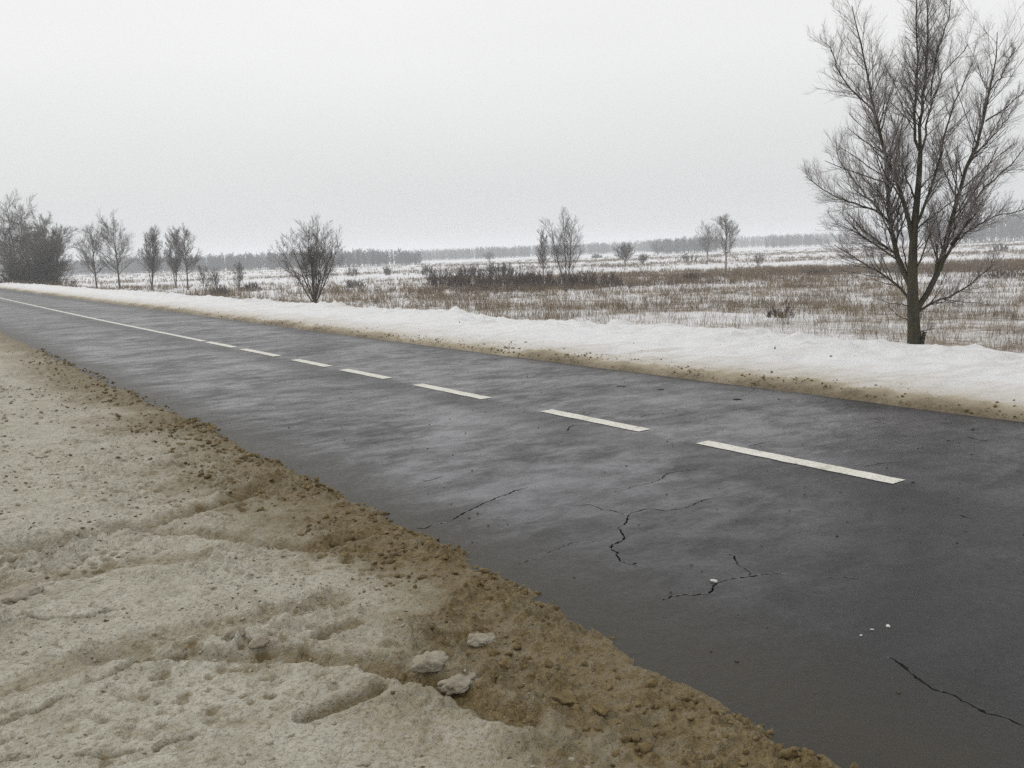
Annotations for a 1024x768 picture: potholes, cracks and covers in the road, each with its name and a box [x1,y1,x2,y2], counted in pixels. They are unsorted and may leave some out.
crack [418,487,528,529]
crack [888,657,1024,726]
crack [661,553,782,601]
crack [546,466,712,565]
